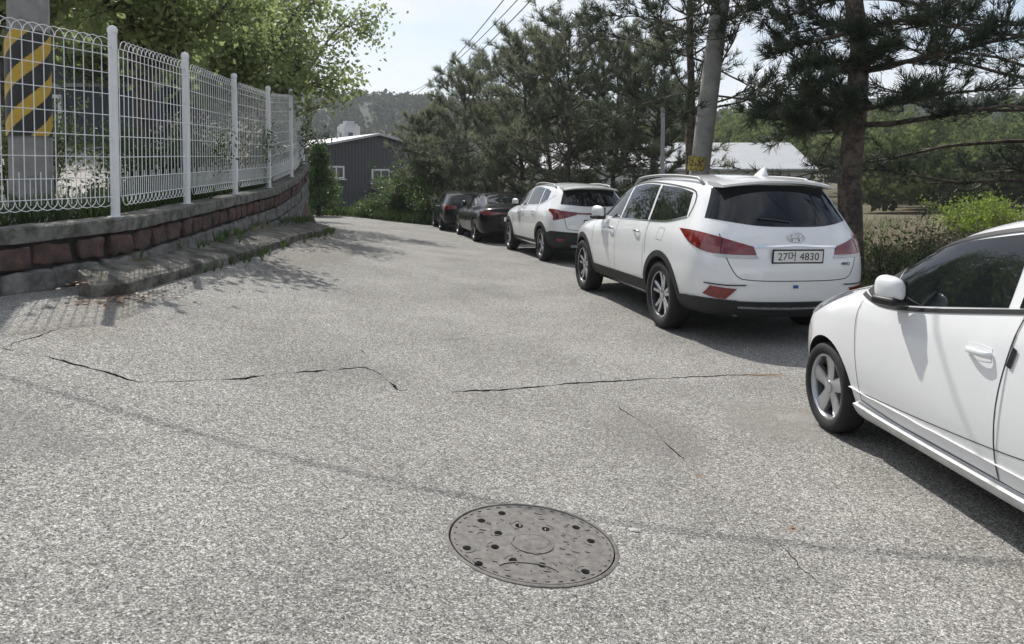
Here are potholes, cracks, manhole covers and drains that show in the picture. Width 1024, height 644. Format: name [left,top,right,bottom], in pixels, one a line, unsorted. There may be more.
manhole cover [445,503,619,588]
crack [0,323,632,391]
crack [452,374,780,393]
